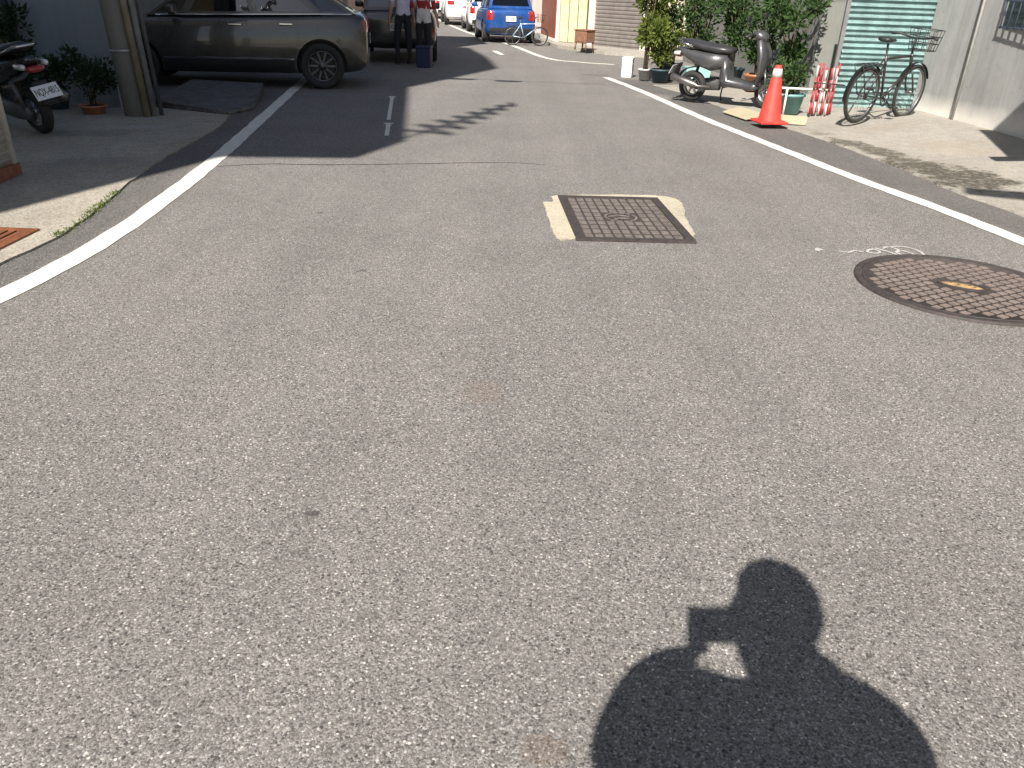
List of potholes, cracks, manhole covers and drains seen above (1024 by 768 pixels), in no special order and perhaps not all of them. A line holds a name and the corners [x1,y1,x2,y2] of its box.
manhole cover [854,254,1024,327]
manhole cover [543,194,697,244]
